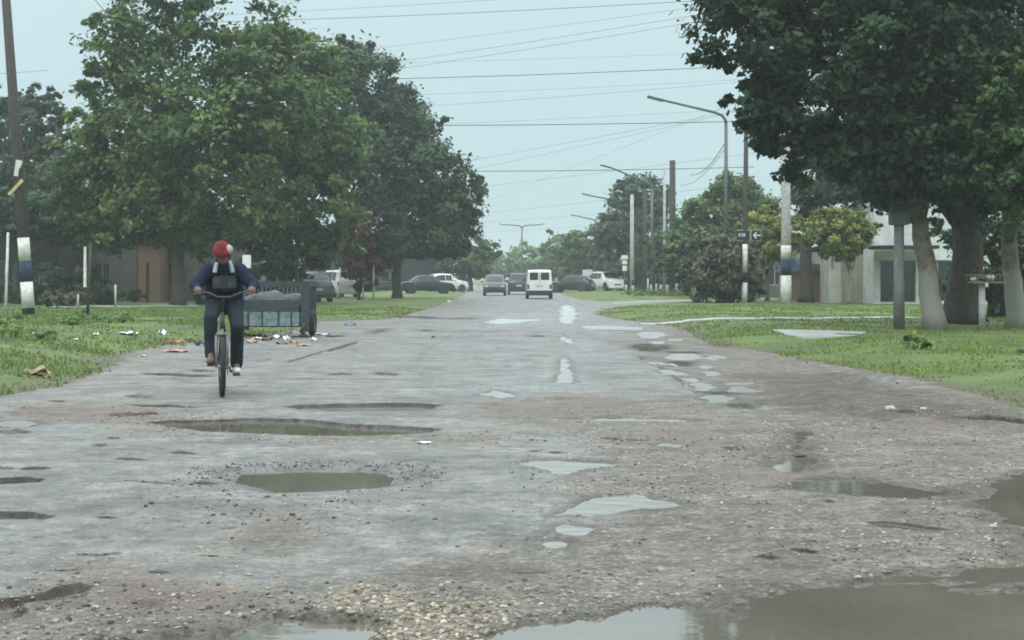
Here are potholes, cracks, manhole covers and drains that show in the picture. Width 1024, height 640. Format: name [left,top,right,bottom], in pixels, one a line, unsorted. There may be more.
pothole [150,418,441,436]
pothole [0,511,54,519]
pothole [0,582,93,620]
pothole [287,403,439,411]
crack [259,341,358,362]
pothole [195,463,433,495]
